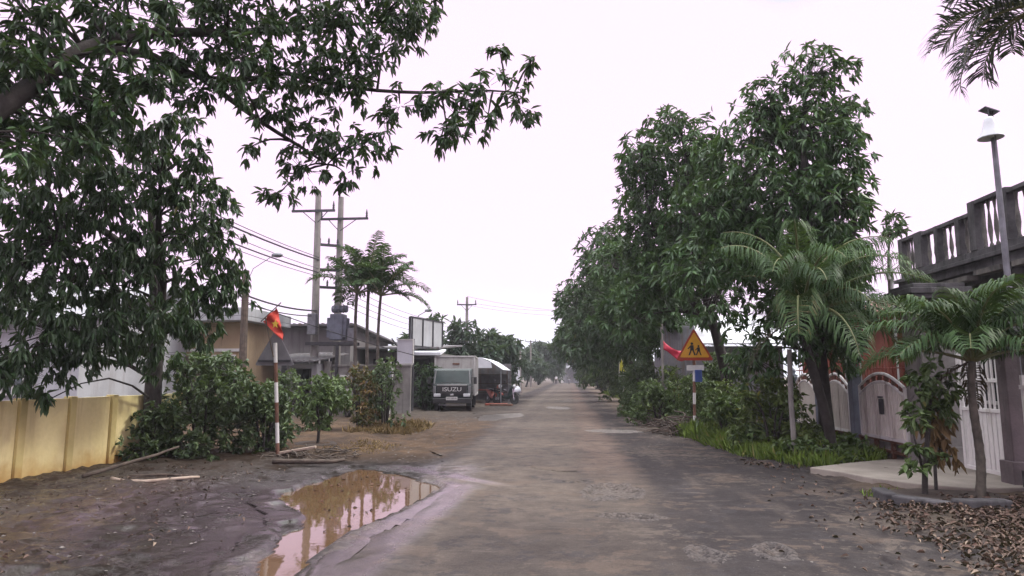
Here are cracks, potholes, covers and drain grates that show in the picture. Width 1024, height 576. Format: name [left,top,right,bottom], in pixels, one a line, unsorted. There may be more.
pothole [682,544,733,564]
pothole [748,541,801,561]
pothole [579,482,646,502]
pothole [594,512,669,521]
pothole [207,465,462,576]
